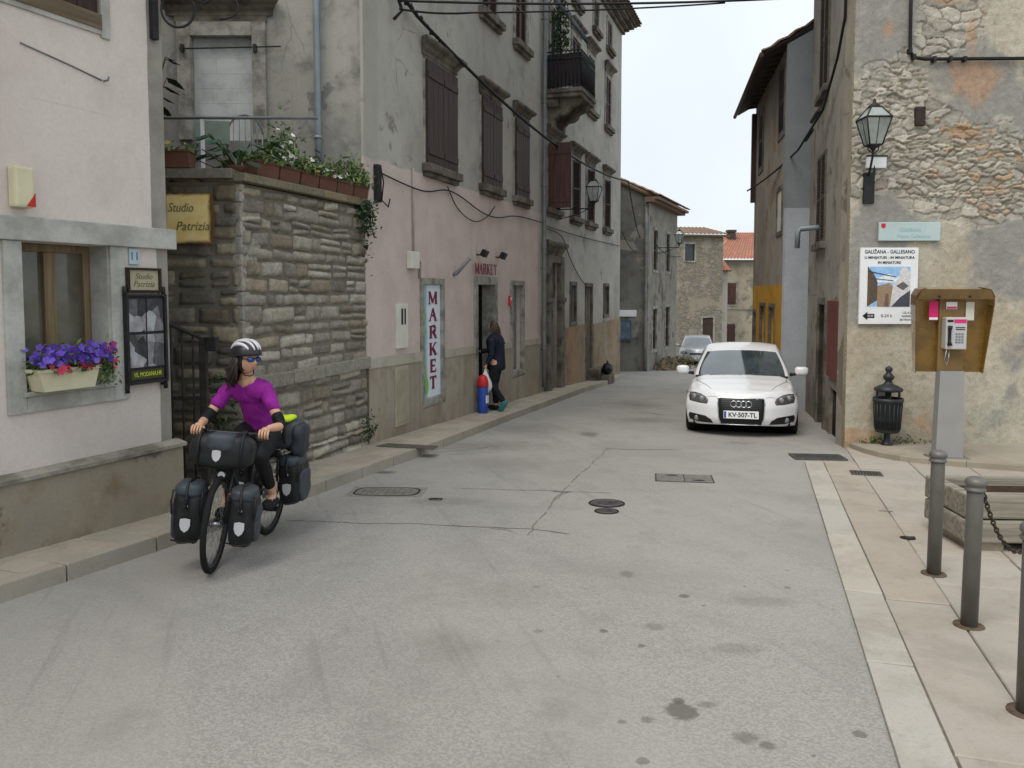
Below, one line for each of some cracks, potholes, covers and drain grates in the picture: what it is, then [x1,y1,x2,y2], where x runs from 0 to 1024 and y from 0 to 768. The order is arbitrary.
manhole cover [655,473,715,483]
drain grate [788,453,848,461]
crack [287,520,567,534]
manhole cover [345,487,428,497]
manhole cover [588,499,625,508]
